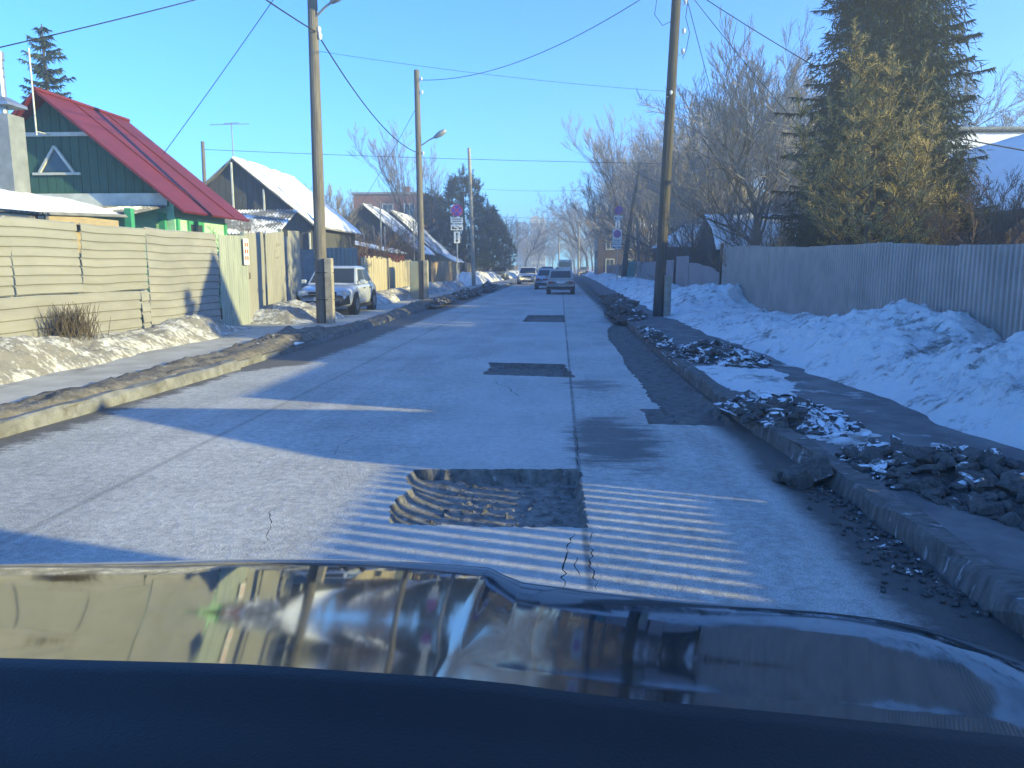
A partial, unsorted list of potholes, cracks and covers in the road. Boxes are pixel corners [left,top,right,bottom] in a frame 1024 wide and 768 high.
pothole [388,468,589,528]
crack [560,533,580,587]
